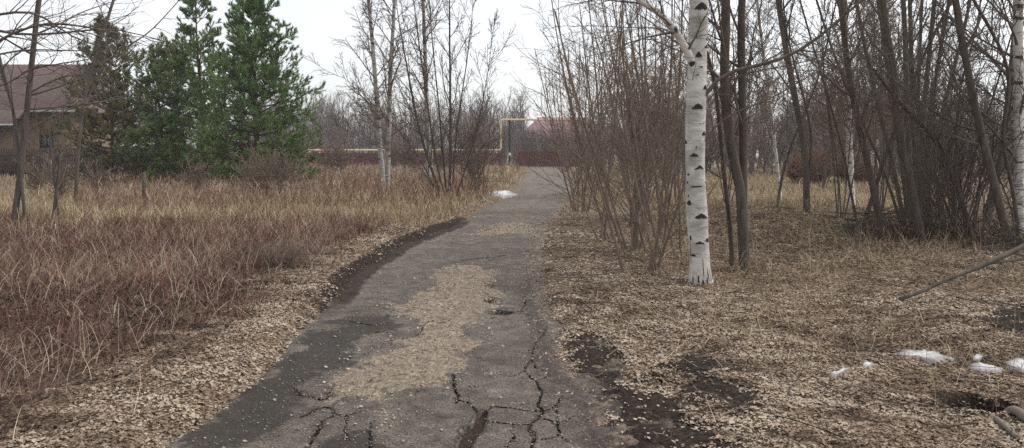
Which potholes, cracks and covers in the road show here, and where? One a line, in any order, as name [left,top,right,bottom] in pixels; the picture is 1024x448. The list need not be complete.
pothole [454,409,490,448]
crack [452,329,572,448]
crack [293,379,372,448]
